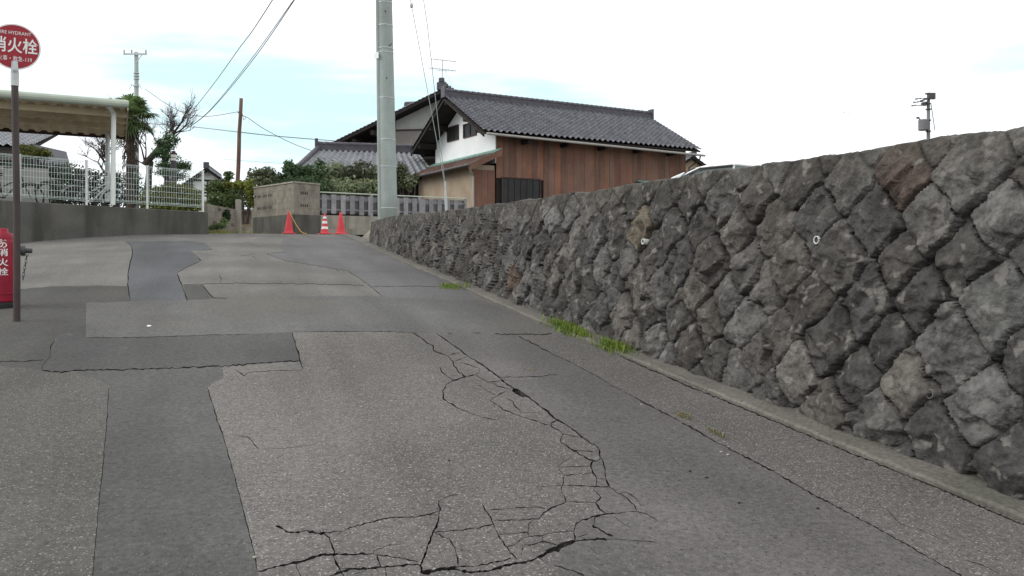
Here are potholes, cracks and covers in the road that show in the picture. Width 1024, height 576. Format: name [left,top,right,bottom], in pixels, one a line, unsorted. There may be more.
crack [621,356,1024,574]
crack [258,333,658,576]
